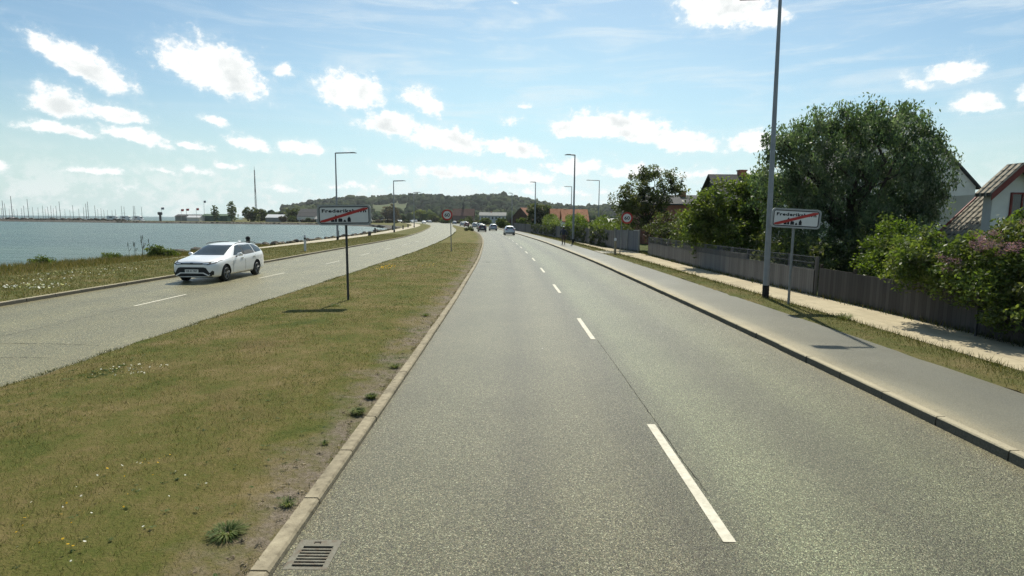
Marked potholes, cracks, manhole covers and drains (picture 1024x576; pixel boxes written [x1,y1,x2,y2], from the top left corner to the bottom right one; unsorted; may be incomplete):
drain grate [282,540,343,570]
